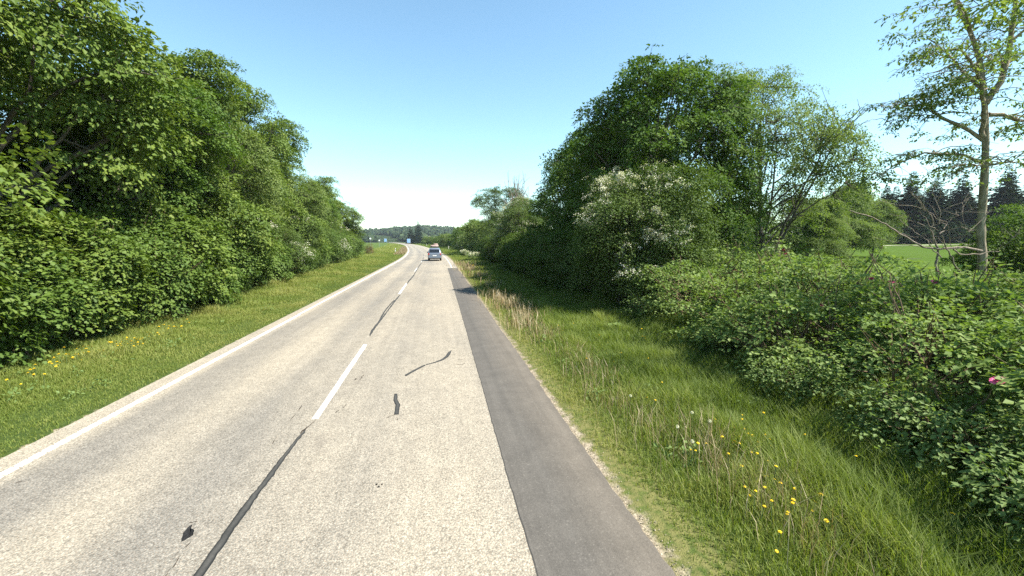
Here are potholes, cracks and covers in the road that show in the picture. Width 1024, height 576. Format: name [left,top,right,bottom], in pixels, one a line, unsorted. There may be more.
pothole [181,521,197,542]
